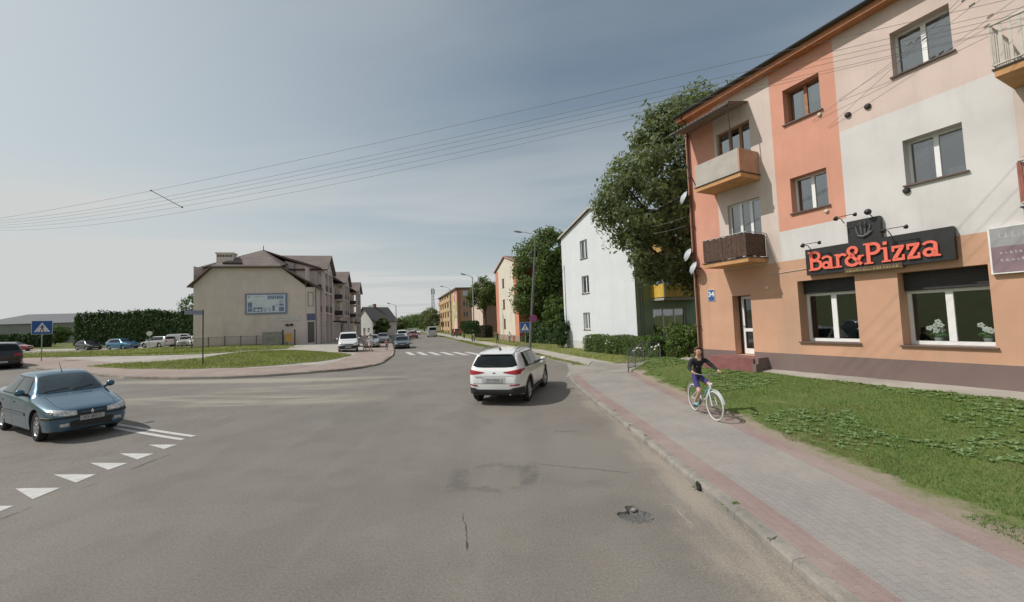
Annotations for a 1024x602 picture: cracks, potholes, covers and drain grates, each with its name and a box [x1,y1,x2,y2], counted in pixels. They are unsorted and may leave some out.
pothole [616,506,654,524]
